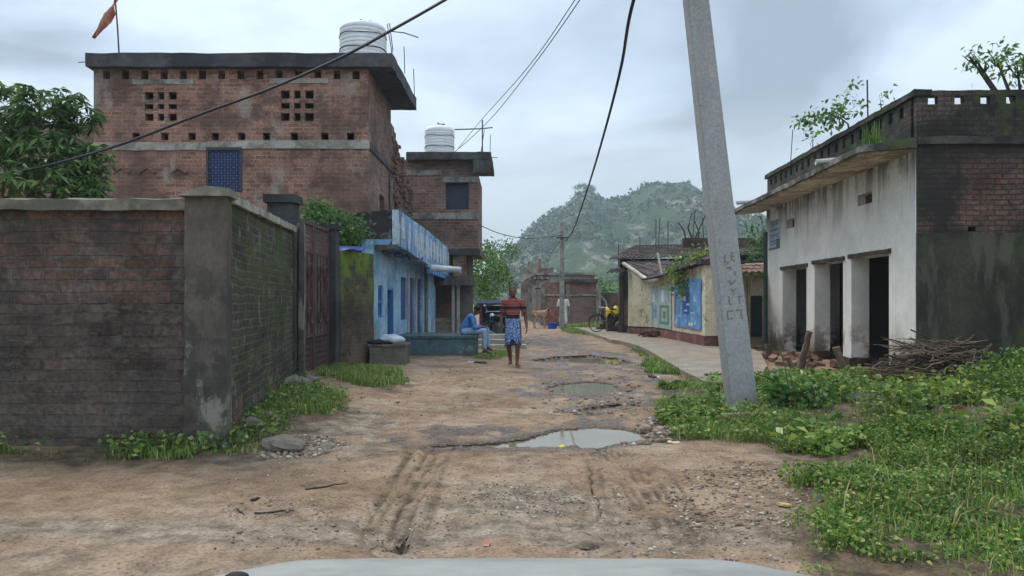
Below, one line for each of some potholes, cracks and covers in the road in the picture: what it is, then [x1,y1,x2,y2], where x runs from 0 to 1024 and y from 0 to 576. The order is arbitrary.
pothole [542,381,624,397]
pothole [529,354,635,365]
pothole [408,426,661,452]
crack [556,463,616,535]
pothole [568,402,637,414]
